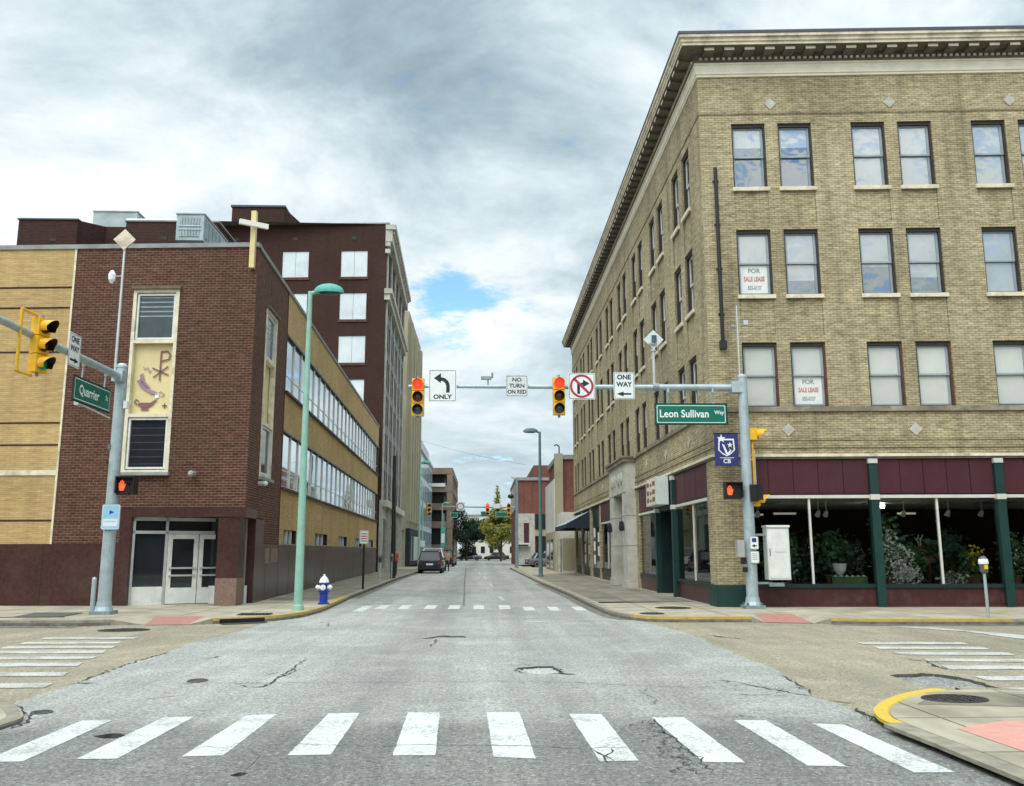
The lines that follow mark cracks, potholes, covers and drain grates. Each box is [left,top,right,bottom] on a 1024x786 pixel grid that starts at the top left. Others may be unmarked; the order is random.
crack [243,659,306,687]
pothole [518,666,562,674]
manhole cover [921,694,990,703]
pothole [891,673,999,688]
crack [705,675,875,718]
crack [629,688,717,775]
drain grate [219,613,273,625]
